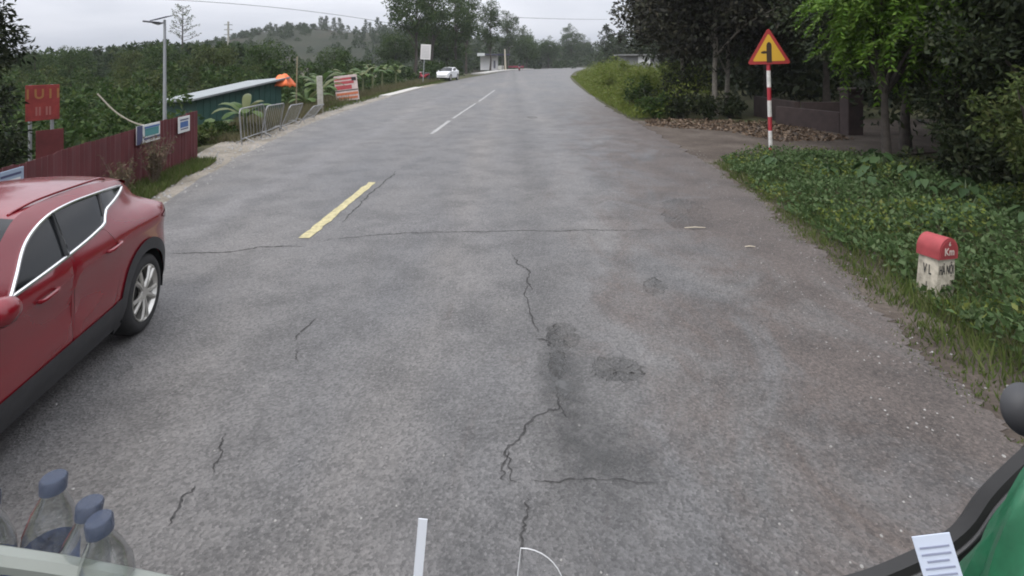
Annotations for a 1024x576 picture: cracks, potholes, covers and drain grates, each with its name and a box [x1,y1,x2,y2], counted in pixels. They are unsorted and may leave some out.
crack [321,228,664,242]
crack [500,392,654,565]
crack [512,255,558,347]
crack [168,486,195,526]
crack [212,433,226,471]
